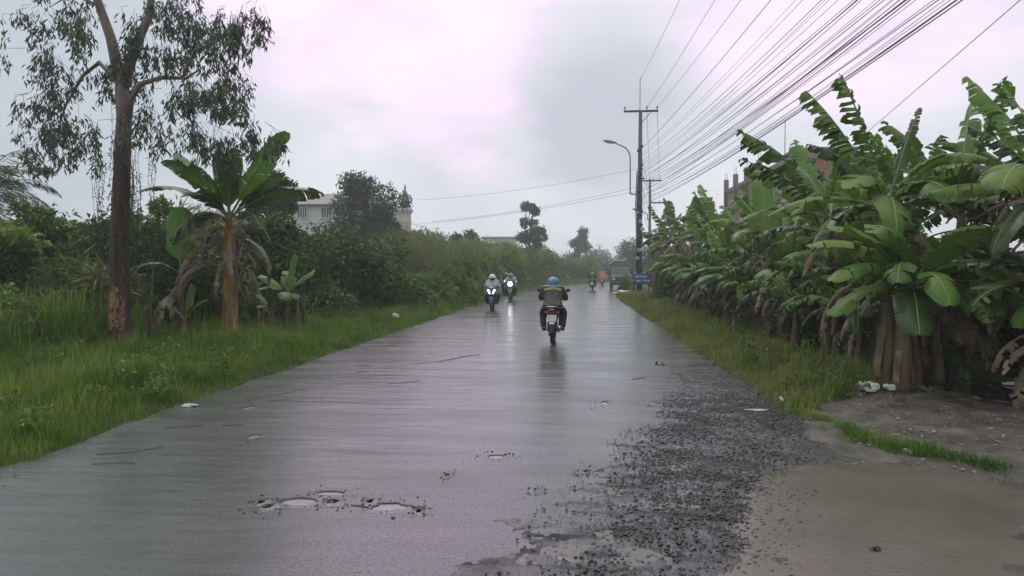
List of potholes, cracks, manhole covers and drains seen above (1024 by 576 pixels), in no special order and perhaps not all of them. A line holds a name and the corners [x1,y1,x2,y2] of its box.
pothole [361,500,420,514]
crack [91,447,161,465]
crack [390,354,480,384]
pothole [247,498,275,508]
pothole [356,497,383,507]
pothole [450,390,813,576]
pothole [305,488,355,498]
pothole [270,495,323,509]
pothole [320,497,350,508]
pothole [251,502,284,513]
pothole [405,506,432,517]
